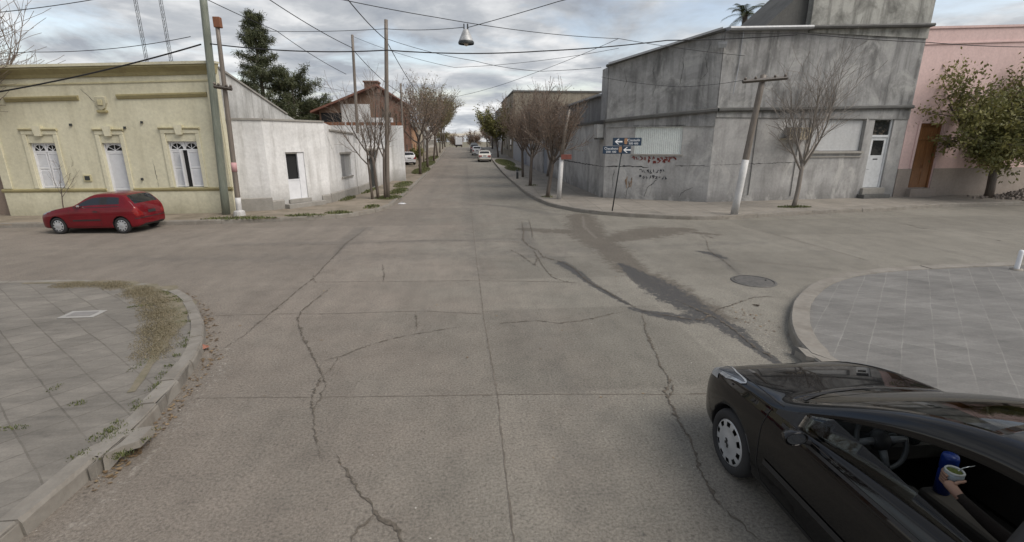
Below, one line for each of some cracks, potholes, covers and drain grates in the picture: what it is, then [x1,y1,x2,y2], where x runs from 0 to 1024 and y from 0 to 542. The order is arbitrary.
crack [504,222,787,541]
crack [337,455,404,542]
utility cover [57,310,107,319]
manhole cover [730,275,778,288]
crack [213,228,449,459]
